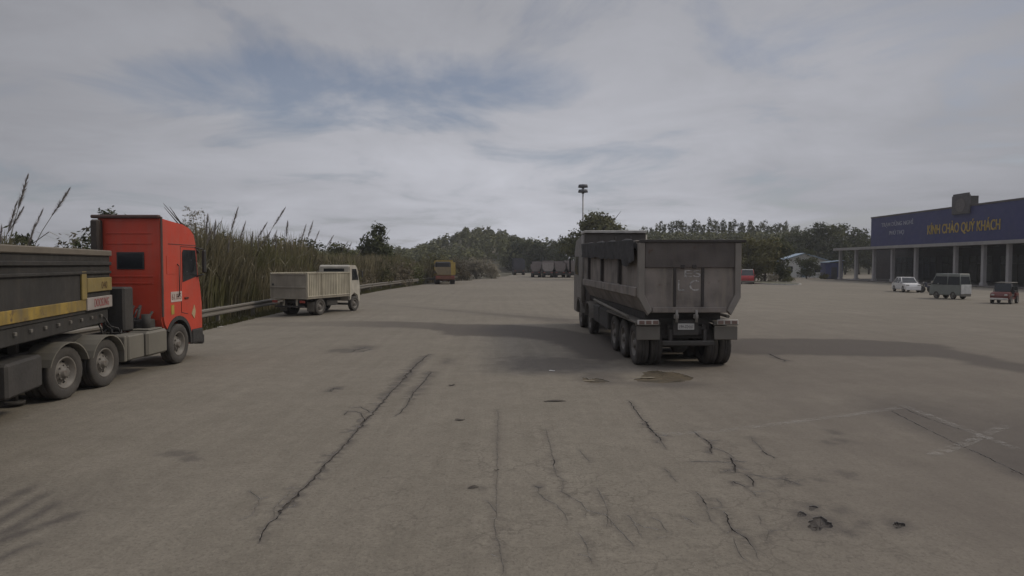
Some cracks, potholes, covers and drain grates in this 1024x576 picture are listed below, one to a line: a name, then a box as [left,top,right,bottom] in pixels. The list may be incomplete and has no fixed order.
crack [242,355,431,542]
crack [488,411,504,573]
crack [535,431,665,562]
pothole [808,516,833,531]
crack [685,431,800,561]
